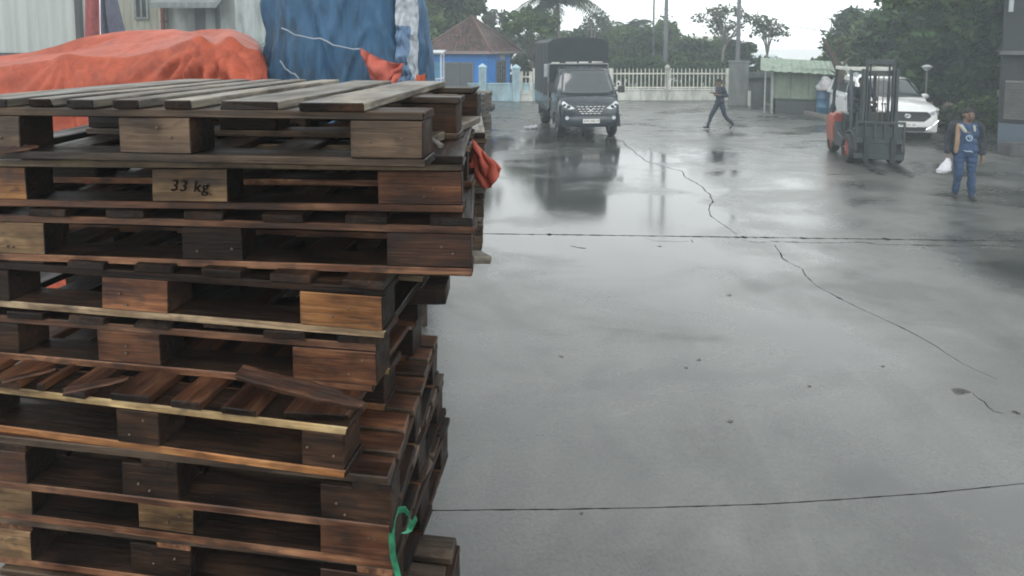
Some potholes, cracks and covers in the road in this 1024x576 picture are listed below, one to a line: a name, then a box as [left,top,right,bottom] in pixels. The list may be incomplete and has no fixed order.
crack [572,142,1024,379]
